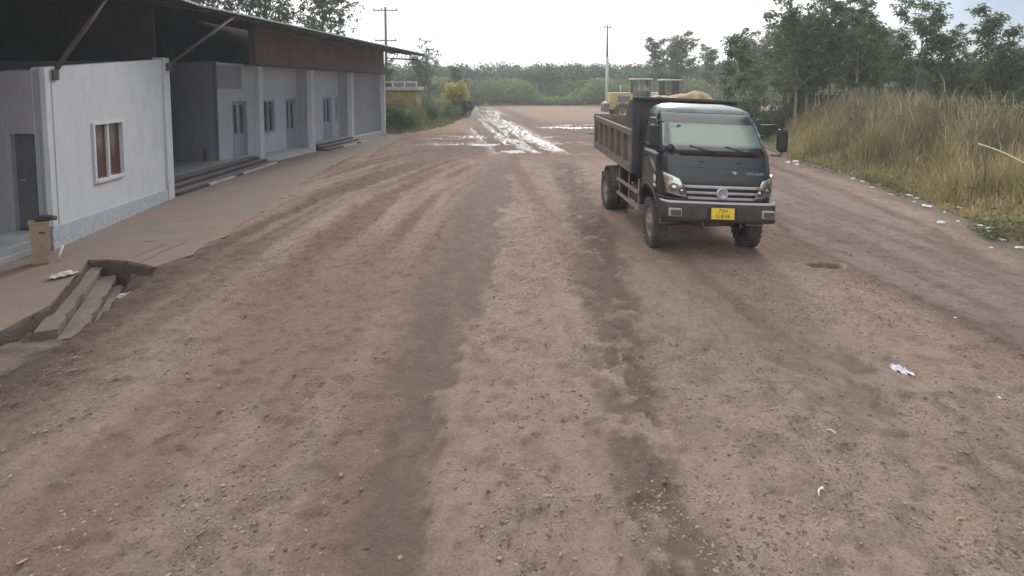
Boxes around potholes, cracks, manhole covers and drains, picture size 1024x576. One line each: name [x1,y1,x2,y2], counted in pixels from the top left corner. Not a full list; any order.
pothole [793,260,850,271]
